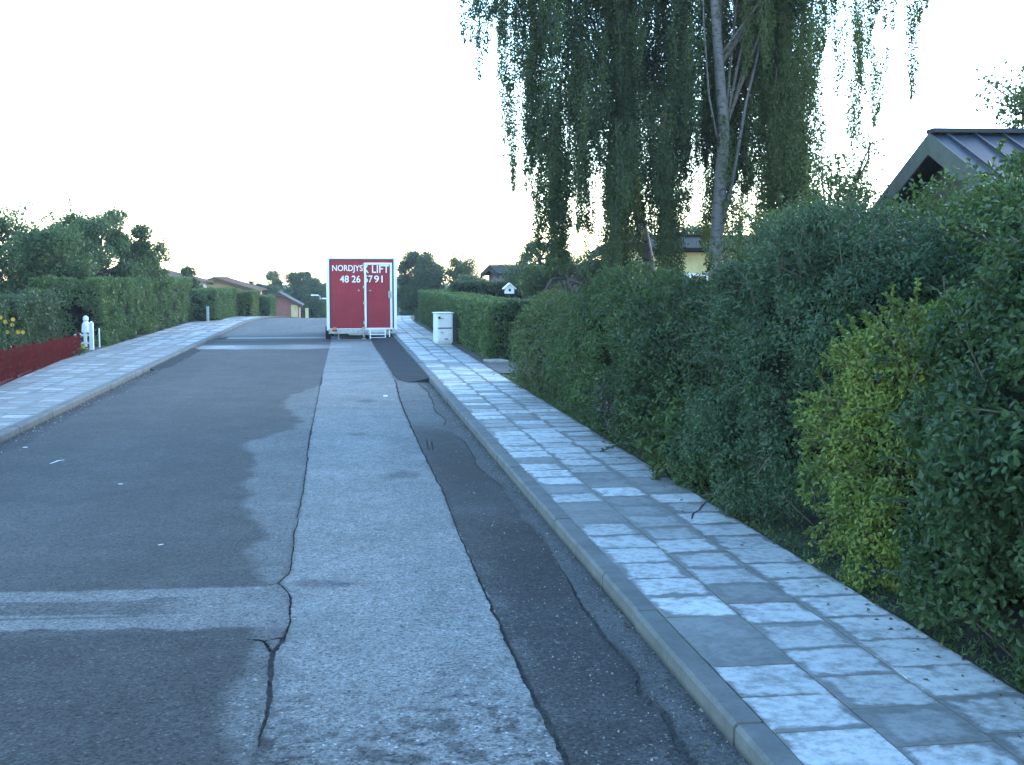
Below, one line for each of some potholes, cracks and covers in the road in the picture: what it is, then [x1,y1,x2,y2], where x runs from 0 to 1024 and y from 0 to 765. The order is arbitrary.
crack [247,374,323,748]
crack [419,384,501,486]
